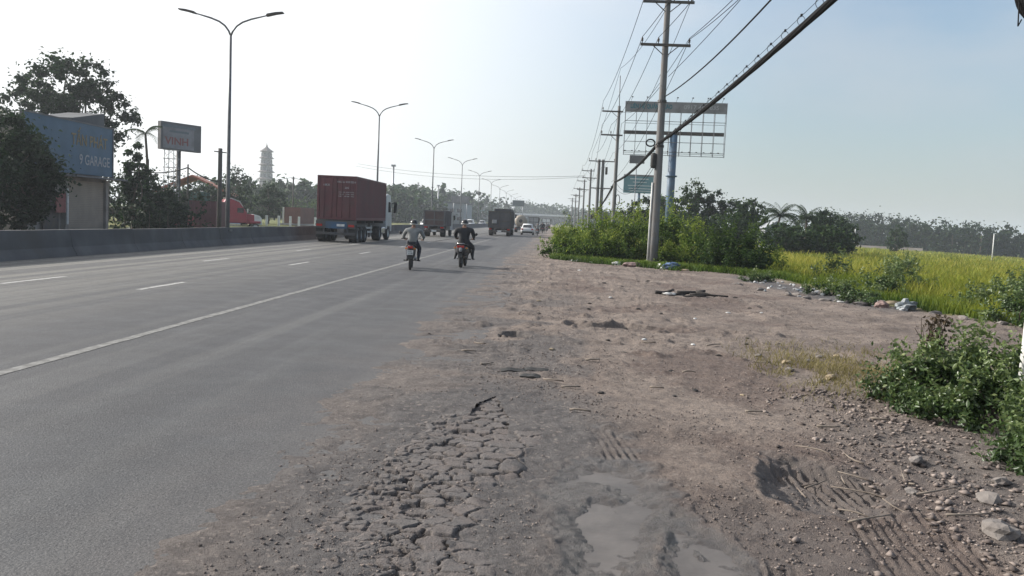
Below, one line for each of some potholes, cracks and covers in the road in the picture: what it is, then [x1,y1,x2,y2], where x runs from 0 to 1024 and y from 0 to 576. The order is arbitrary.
pothole [513,421,708,576]
pothole [497,331,533,339]
crack [296,396,543,576]
pothole [652,521,770,576]
